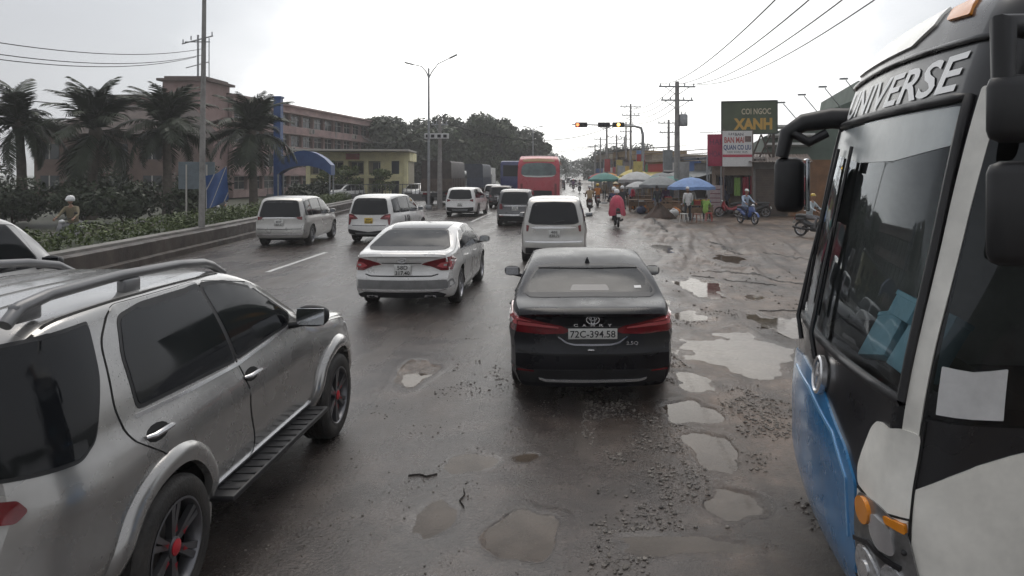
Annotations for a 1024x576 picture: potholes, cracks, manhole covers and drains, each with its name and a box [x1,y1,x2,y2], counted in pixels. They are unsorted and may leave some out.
pothole [668,424,752,483]
pothole [383,354,453,396]
pothole [647,394,741,428]
pothole [691,480,777,528]
pothole [459,498,575,575]
